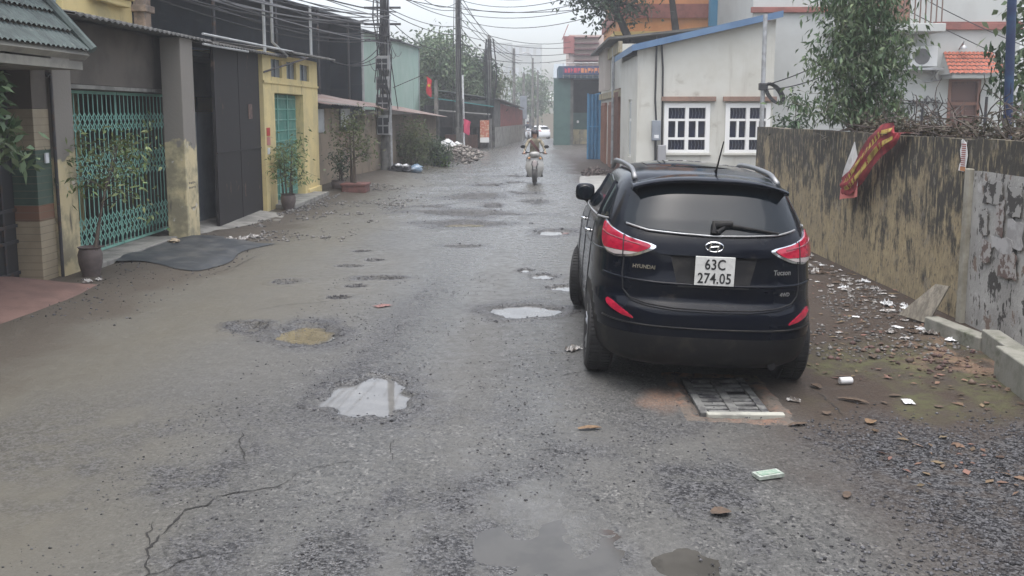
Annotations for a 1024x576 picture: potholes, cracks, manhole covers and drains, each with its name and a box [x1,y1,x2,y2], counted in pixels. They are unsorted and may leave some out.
pothole [534,282,570,294]
pothole [517,271,570,282]
pothole [505,266,546,276]
pothole [344,274,420,282]
pothole [215,319,280,336]
pothole [260,277,312,287]
pothole [297,364,428,429]
pothole [253,317,366,350]
pothole [469,201,515,209]
crack [144,460,360,576]
pothole [316,293,364,302]
pothole [473,301,584,322]
